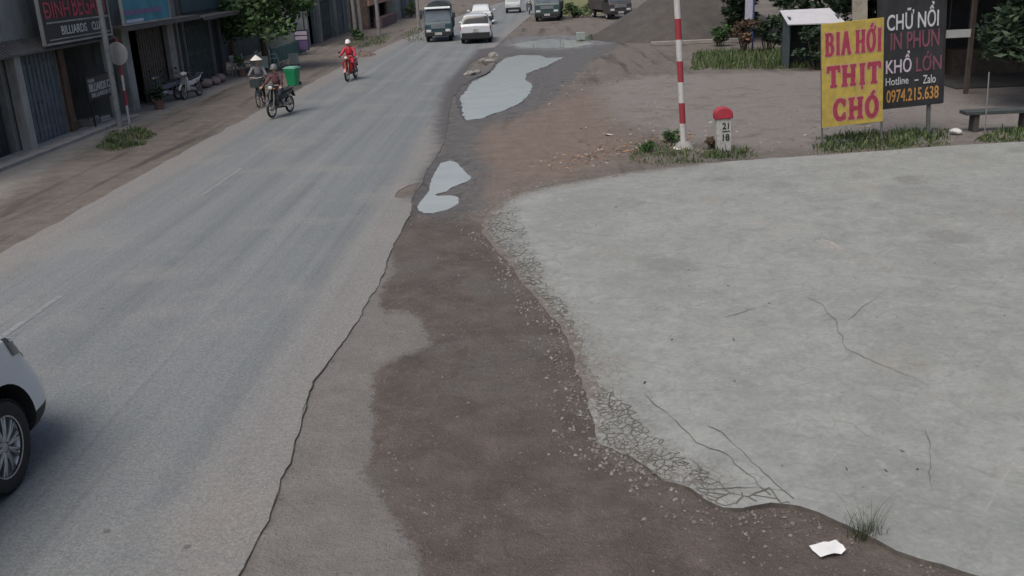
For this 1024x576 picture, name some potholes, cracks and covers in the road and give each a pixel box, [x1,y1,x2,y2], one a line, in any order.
pothole [455,52,569,122]
crack [592,389,794,506]
crack [487,208,590,370]
crack [238,212,411,576]
pothole [412,152,479,215]
crack [810,295,917,379]
